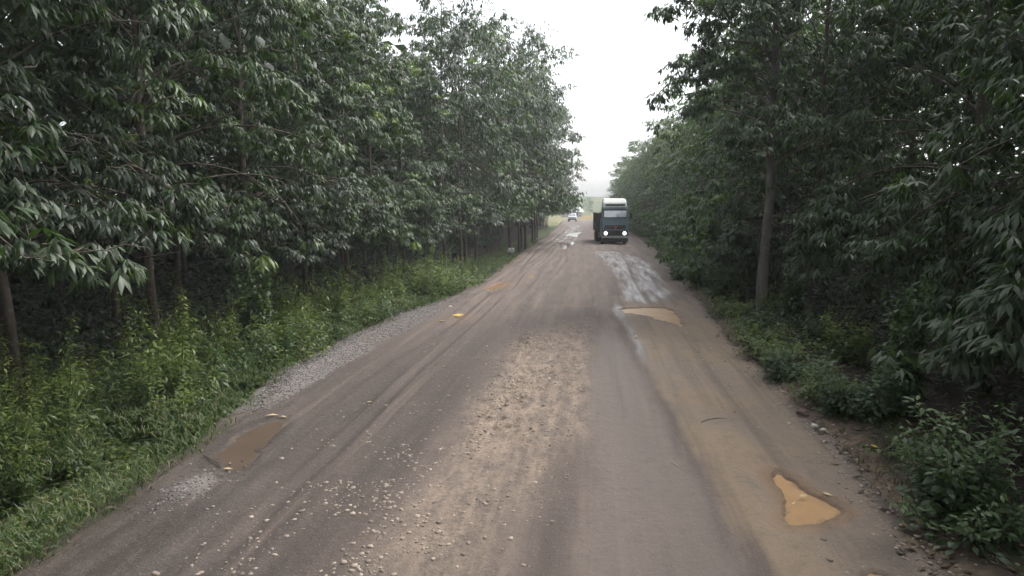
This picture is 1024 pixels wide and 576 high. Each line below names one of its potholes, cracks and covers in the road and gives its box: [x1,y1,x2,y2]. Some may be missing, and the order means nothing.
pothole [613,306,692,328]
pothole [756,464,857,535]
